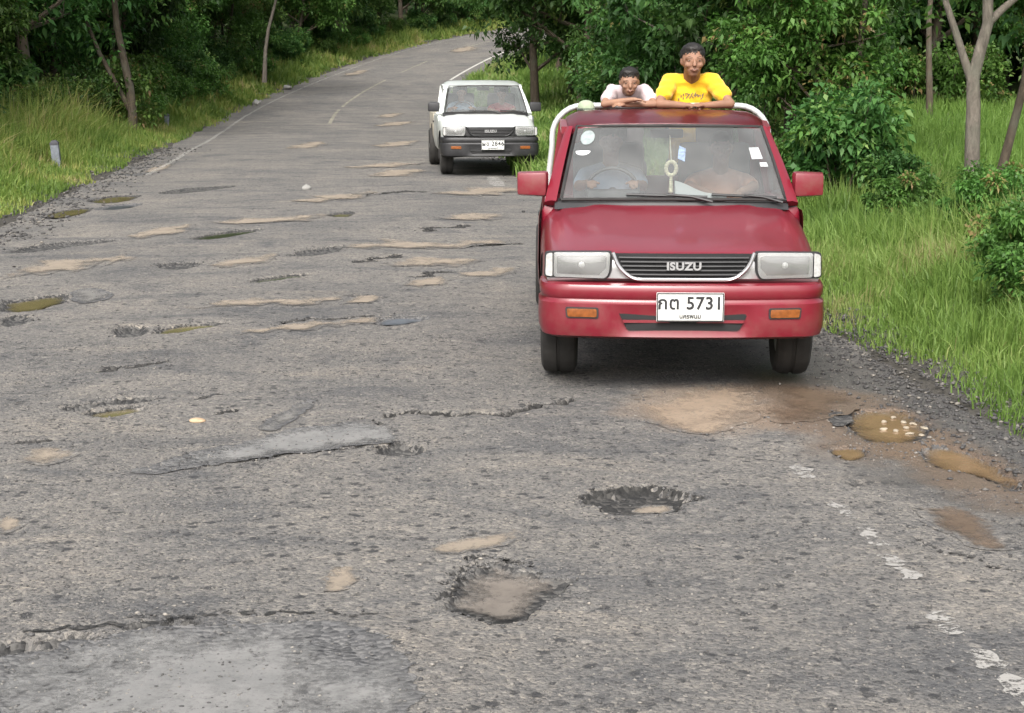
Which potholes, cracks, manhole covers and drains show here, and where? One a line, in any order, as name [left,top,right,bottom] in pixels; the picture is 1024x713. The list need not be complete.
pothole [152,323,227,334]
pothole [127,224,196,239]
pothole [39,208,93,219]
pothole [188,293,366,309]
pothole [0,294,69,312]
pothole [832,446,866,461]
pothole [445,562,576,624]
pothole [193,229,263,240]
pothole [912,504,1017,551]
pothole [233,317,375,335]
crack [250,398,575,461]
pothole [917,443,1022,491]
